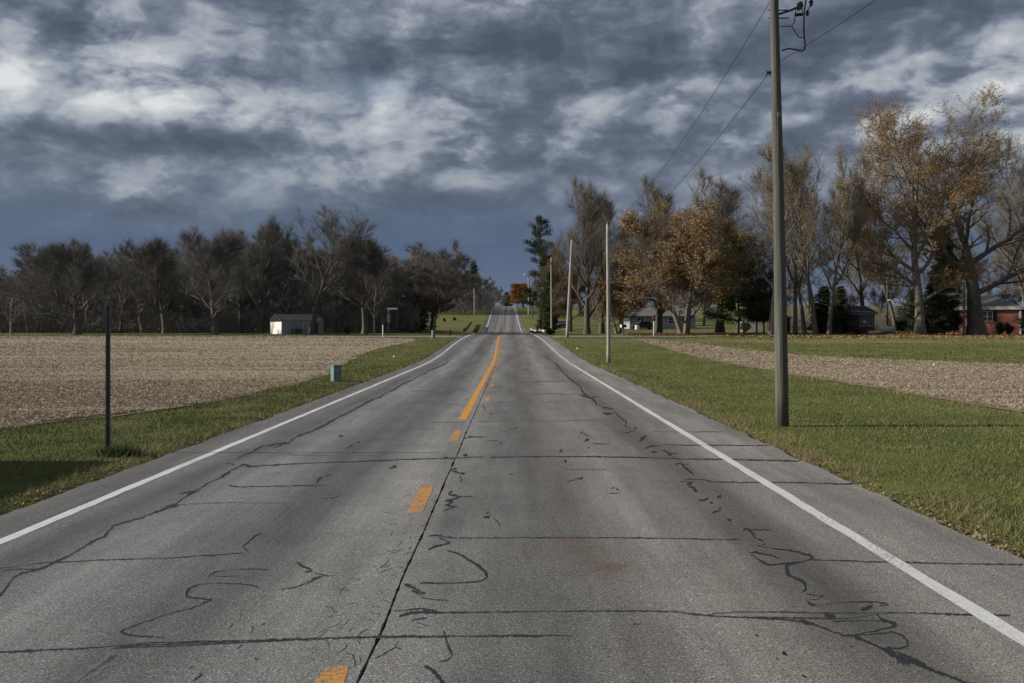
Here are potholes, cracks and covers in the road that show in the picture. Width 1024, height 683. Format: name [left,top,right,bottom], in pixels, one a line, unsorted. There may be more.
crack [0,361,1011,681]
